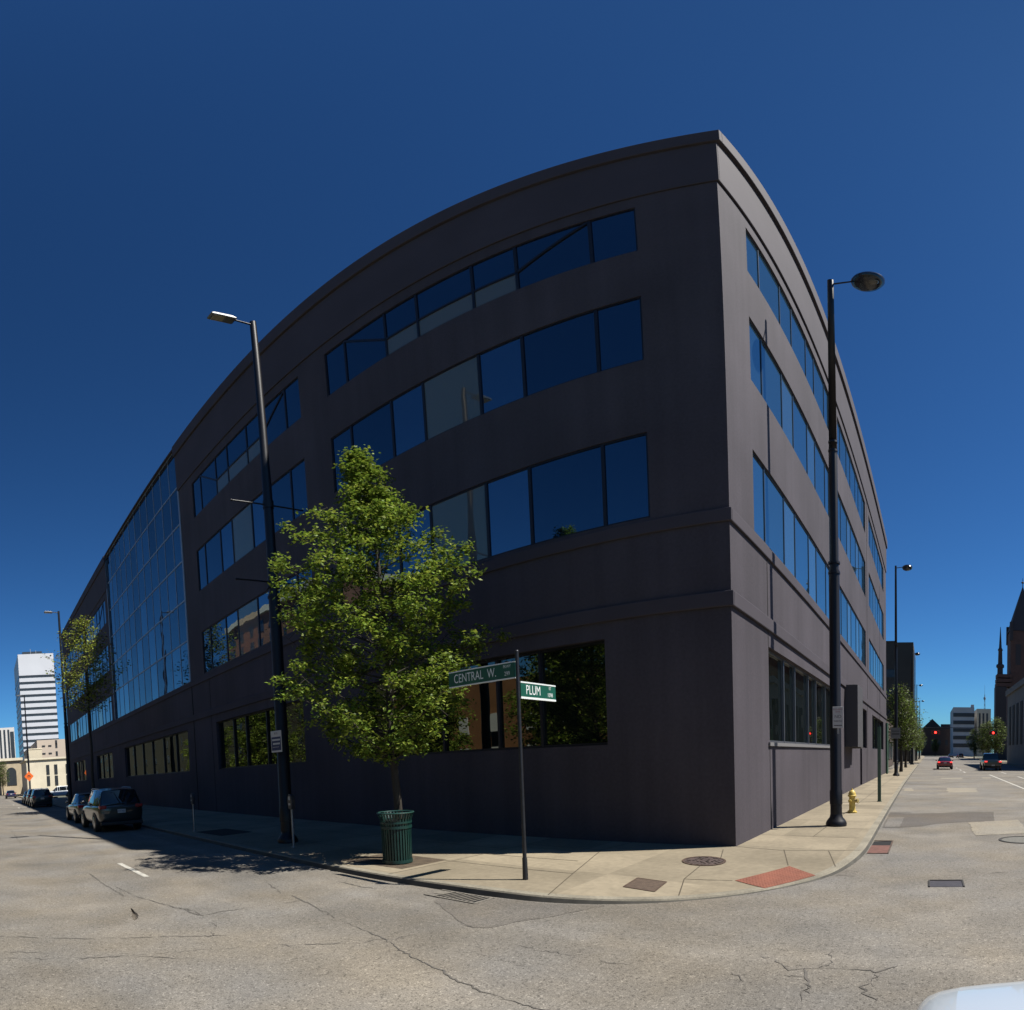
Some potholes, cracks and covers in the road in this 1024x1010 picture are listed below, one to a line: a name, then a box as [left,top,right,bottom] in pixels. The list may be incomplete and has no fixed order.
manhole cover [682,856,726,866]
utility cover [623,877,667,891]
manhole cover [998,836,1024,844]
crack [16,896,431,959]
drain grate [424,889,495,904]
manhole cover [928,879,965,887]
crack [762,950,898,1001]
